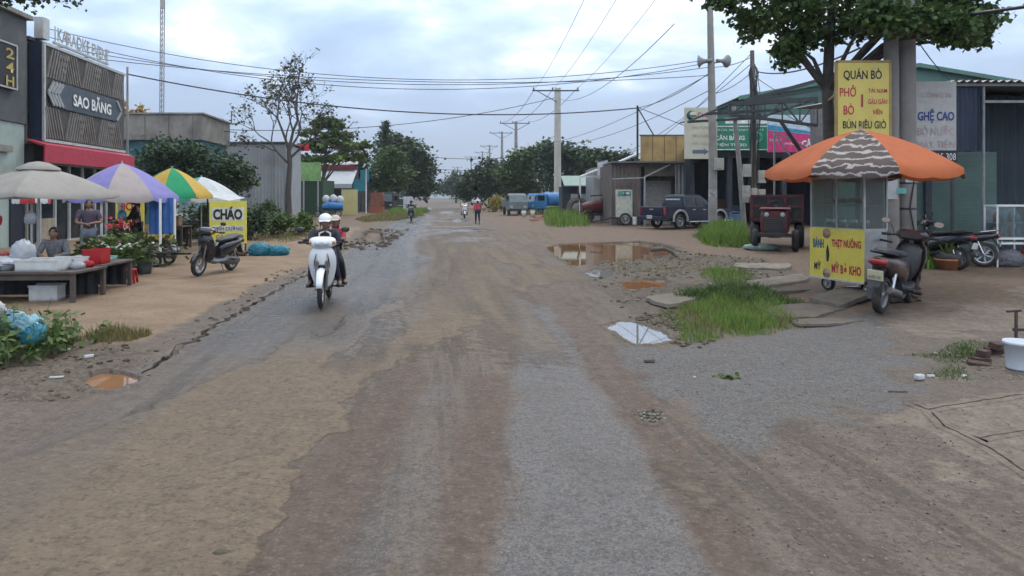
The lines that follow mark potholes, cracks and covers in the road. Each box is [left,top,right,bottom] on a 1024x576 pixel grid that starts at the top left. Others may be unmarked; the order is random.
pothole [598,319,680,347]
pothole [614,277,680,291]
pothole [356,230,388,244]
pothole [630,406,674,428]
pothole [65,367,153,394]
pothole [543,240,688,267]
